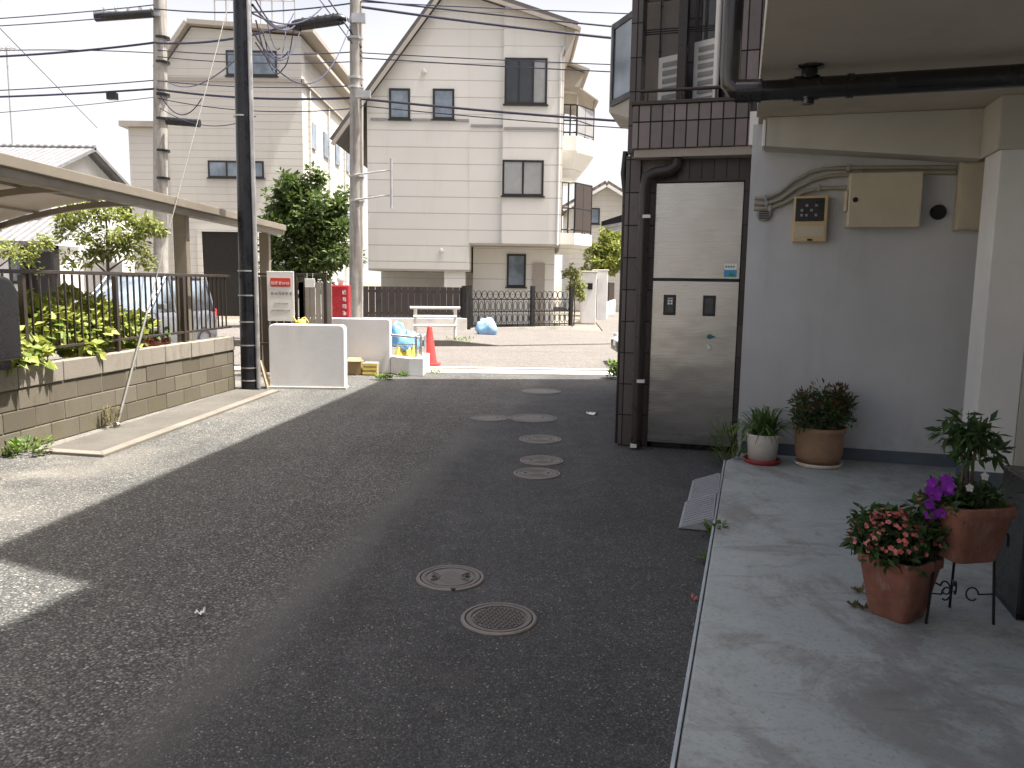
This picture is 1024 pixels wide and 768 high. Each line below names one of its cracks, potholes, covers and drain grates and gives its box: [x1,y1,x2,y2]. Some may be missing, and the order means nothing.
manhole cover [416,565,485,592]
manhole cover [509,414,558,423]
manhole cover [514,467,560,480]
manhole cover [470,414,509,422]
manhole cover [520,455,563,466]
manhole cover [461,602,537,636]
manhole cover [519,435,562,444]
